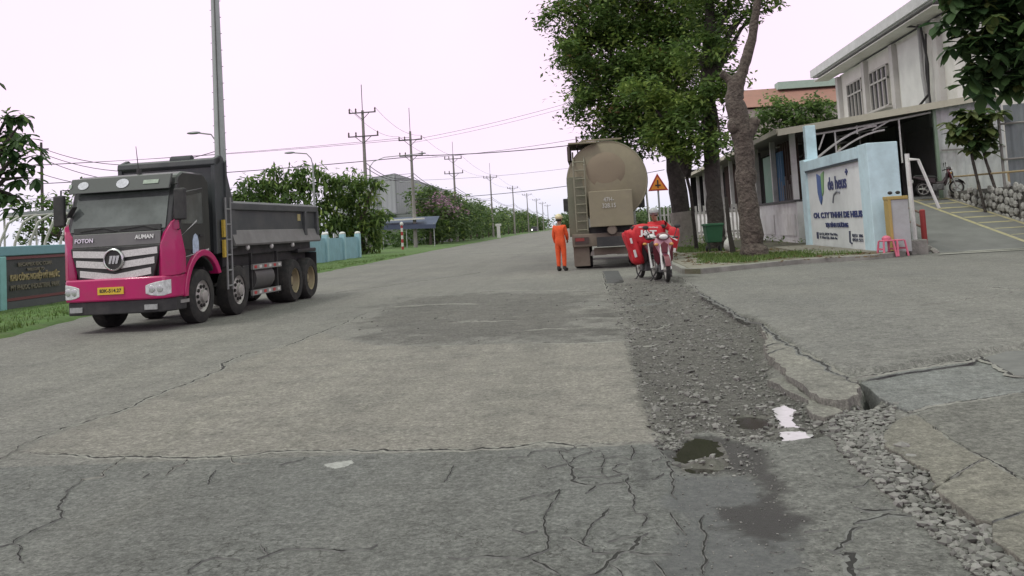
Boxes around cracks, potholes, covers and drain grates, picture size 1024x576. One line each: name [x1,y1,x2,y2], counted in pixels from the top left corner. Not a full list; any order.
pothole [730,413,779,430]
crack [854,355,1024,413]
crack [0,313,366,564]
pothole [676,437,730,474]
crack [770,507,913,576]
crack [448,445,708,576]
